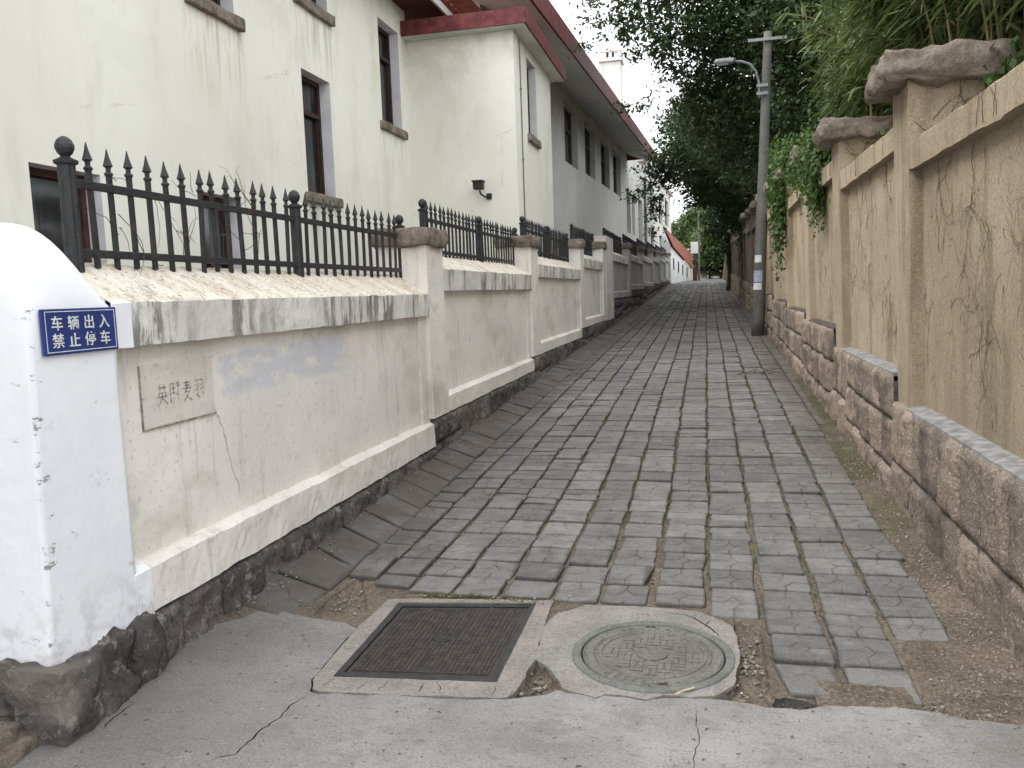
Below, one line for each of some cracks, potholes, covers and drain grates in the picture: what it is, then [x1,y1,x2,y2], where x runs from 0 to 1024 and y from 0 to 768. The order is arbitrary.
manhole cover [572,621,735,693]
crack [215,695,306,759]
manhole cover [333,603,536,682]
pothole [515,661,561,698]
pothole [772,697,818,710]
